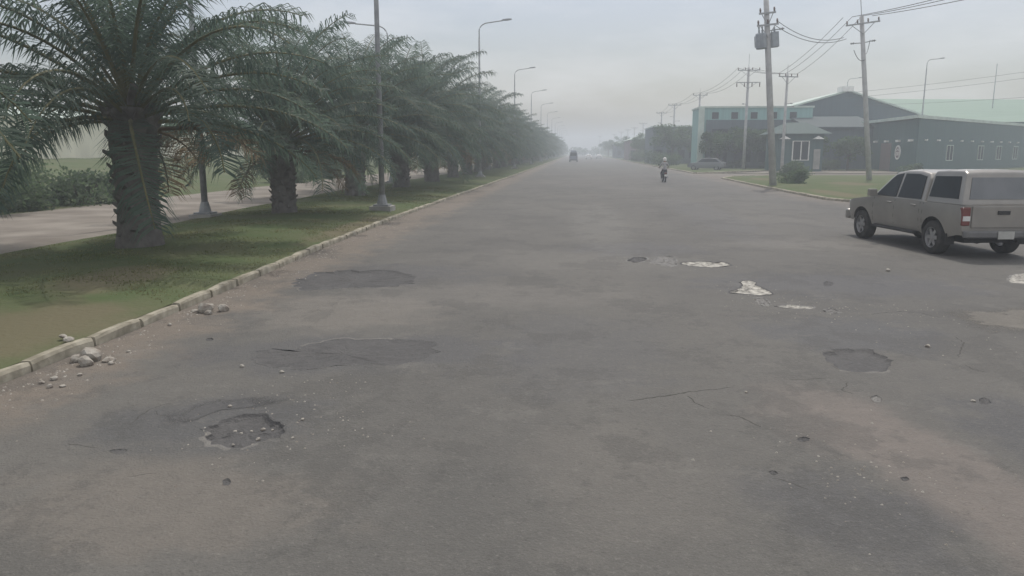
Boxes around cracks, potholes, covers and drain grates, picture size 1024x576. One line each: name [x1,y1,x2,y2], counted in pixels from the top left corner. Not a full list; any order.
pothole [199,412,291,450]
crack [627,387,733,409]
